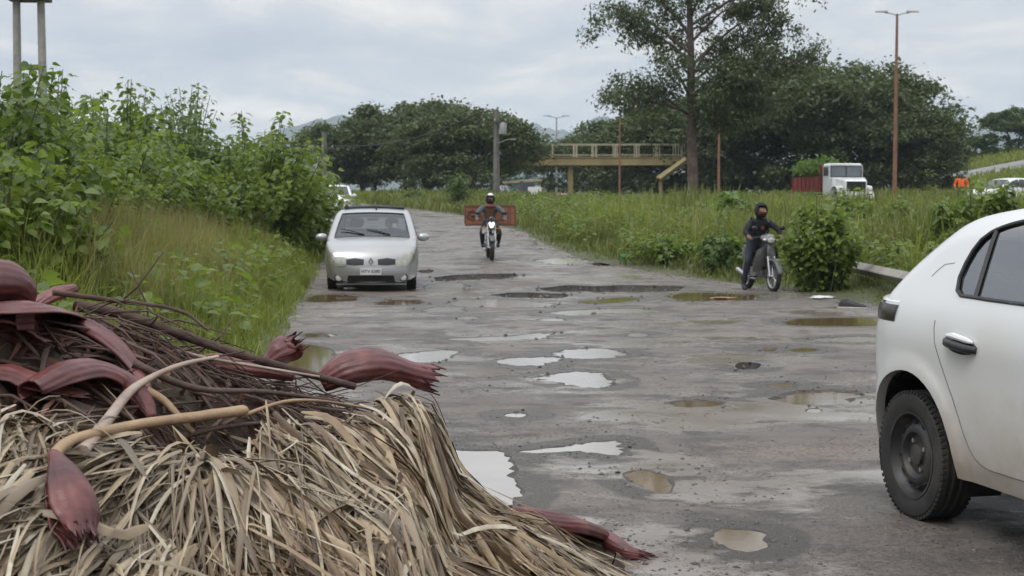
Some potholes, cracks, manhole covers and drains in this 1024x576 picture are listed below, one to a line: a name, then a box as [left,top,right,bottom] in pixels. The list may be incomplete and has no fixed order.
pothole [301,292,364,302]
pothole [397,348,464,363]
pothole [684,520,772,552]
pothole [615,467,675,494]
pothole [781,317,878,327]
pothole [726,361,769,371]
pothole [496,408,528,418]
pothole [455,449,526,507]
pothole [429,273,525,282]
pothole [768,386,865,406]
pothole [524,371,616,388]
pothole [536,284,690,294]
